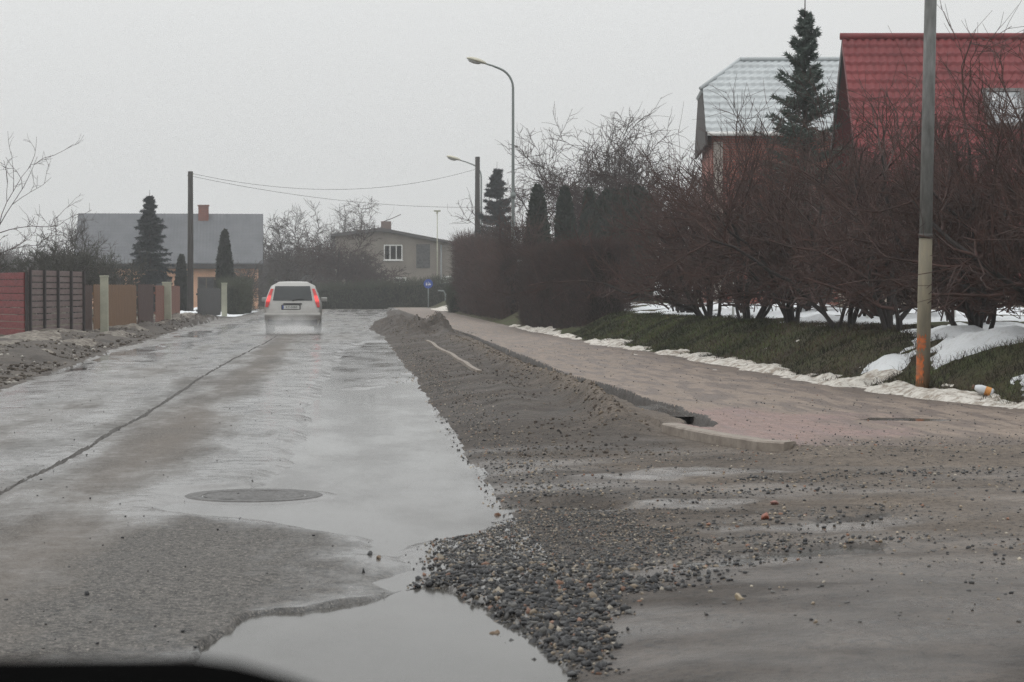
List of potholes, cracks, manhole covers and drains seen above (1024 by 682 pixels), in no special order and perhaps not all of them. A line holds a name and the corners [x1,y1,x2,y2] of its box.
manhole cover [184,489,323,502]
